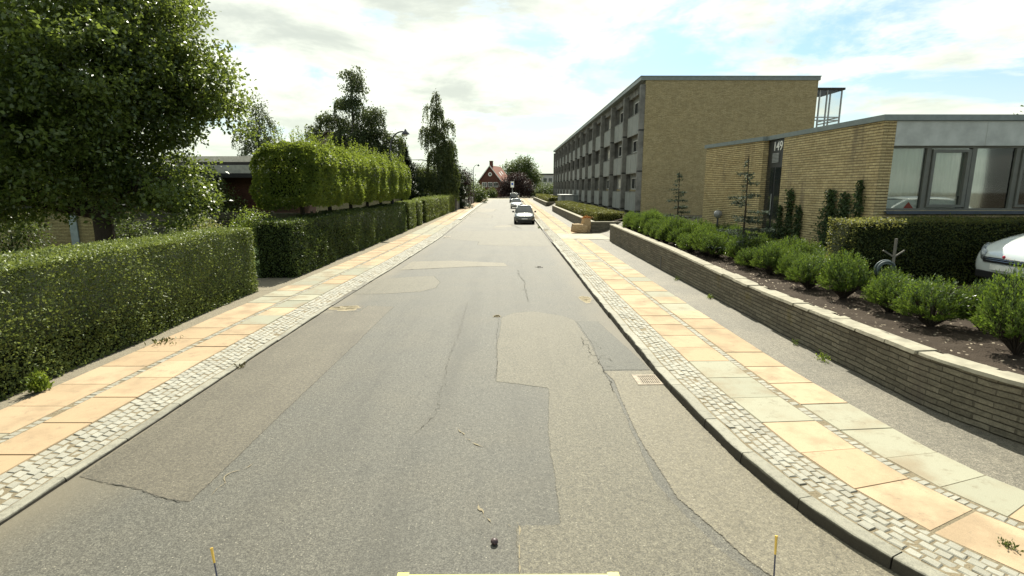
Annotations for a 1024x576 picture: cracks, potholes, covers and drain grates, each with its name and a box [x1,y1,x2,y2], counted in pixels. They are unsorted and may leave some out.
drain grate [632,374,664,385]
